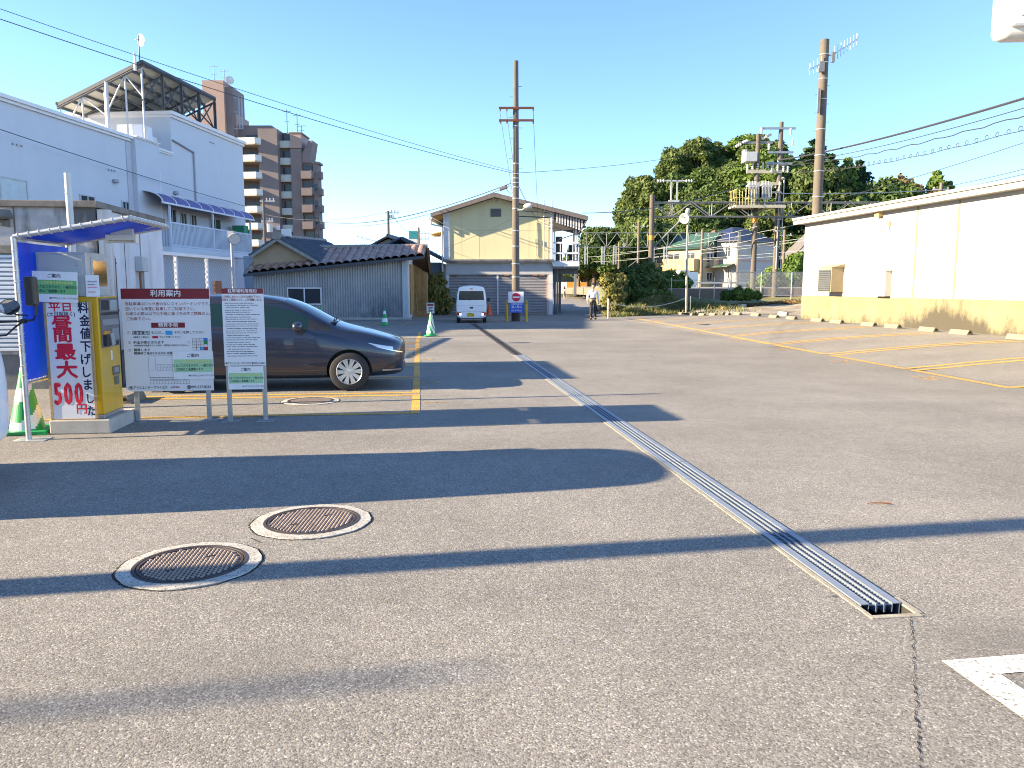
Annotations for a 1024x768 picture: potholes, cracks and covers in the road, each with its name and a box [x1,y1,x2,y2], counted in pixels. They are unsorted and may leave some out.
manhole cover [111,542,265,592]
manhole cover [280,397,340,405]
crack [908,617,922,768]
manhole cover [248,504,373,540]
